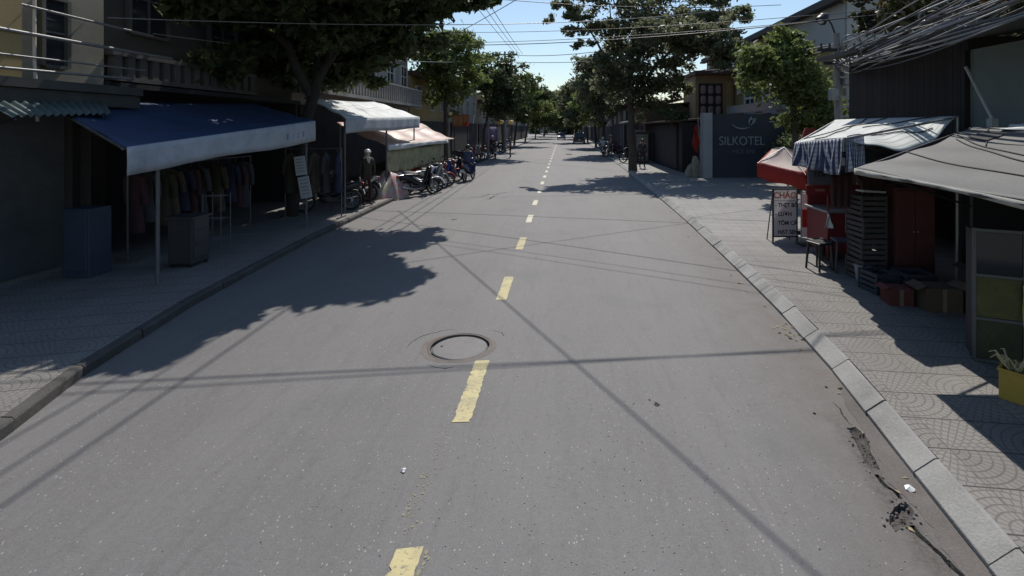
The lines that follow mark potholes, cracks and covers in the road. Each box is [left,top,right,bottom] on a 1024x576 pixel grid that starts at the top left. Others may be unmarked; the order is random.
crack [913,526,964,576]
manhole cover [420,333,497,363]
pothole [881,499,922,532]
crack [877,475,903,499]
pothole [846,424,880,473]
